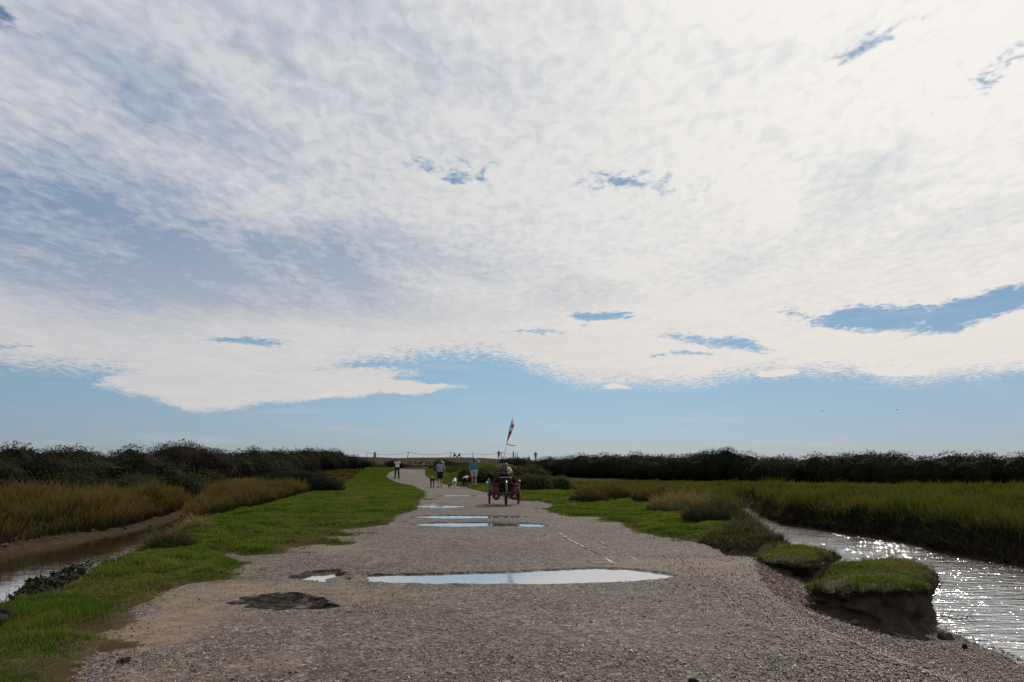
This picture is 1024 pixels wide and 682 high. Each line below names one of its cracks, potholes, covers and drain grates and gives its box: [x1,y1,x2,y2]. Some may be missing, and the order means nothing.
pothole [276,568,369,584]
pothole [208,590,353,613]
pothole [325,566,690,586]
